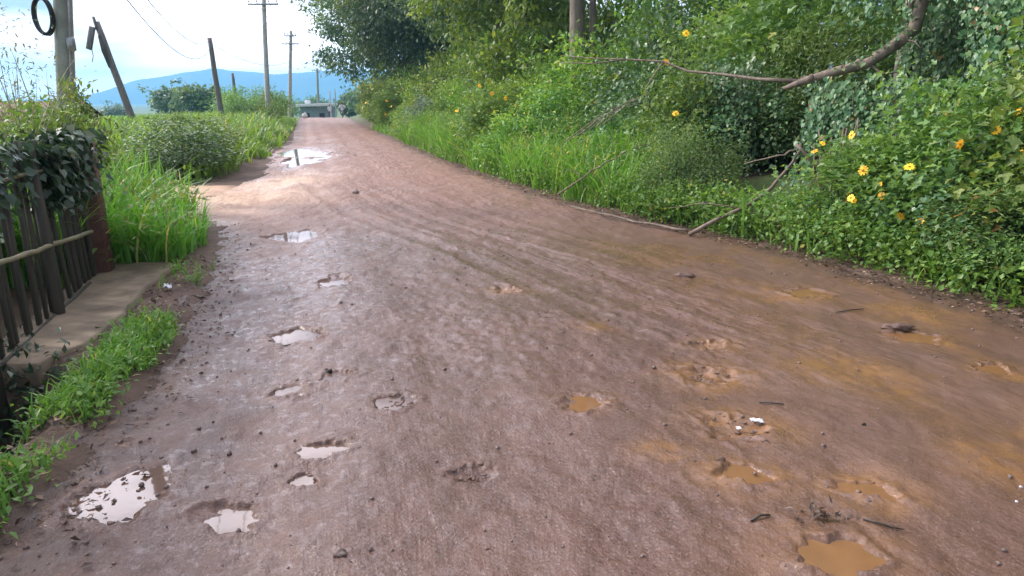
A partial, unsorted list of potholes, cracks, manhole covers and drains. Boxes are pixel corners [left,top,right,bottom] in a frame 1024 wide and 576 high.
pothole [701,457,790,491]
pothole [548,390,622,418]
pothole [779,526,906,576]
pothole [285,433,364,468]
pothole [252,227,331,245]
pothole [274,467,329,495]
pothole [35,456,187,537]
pothole [168,495,275,542]
pothole [814,475,919,509]
pothole [263,146,351,173]
pothole [258,379,318,403]
pothole [260,324,336,349]
